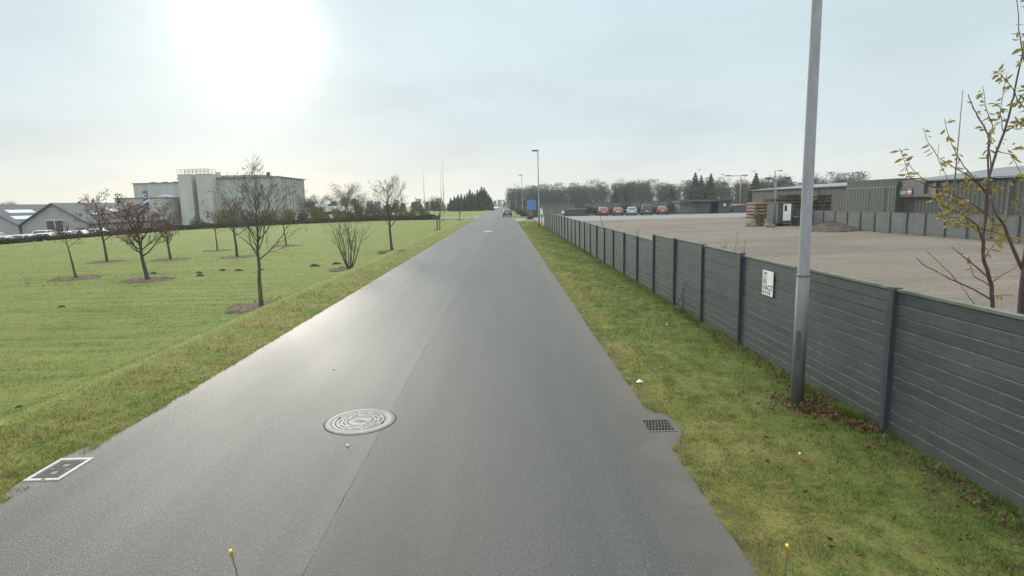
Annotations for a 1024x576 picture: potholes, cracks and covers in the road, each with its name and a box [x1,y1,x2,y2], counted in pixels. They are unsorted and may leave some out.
drain grate [639,418,678,432]
manhole cover [323,409,397,435]
